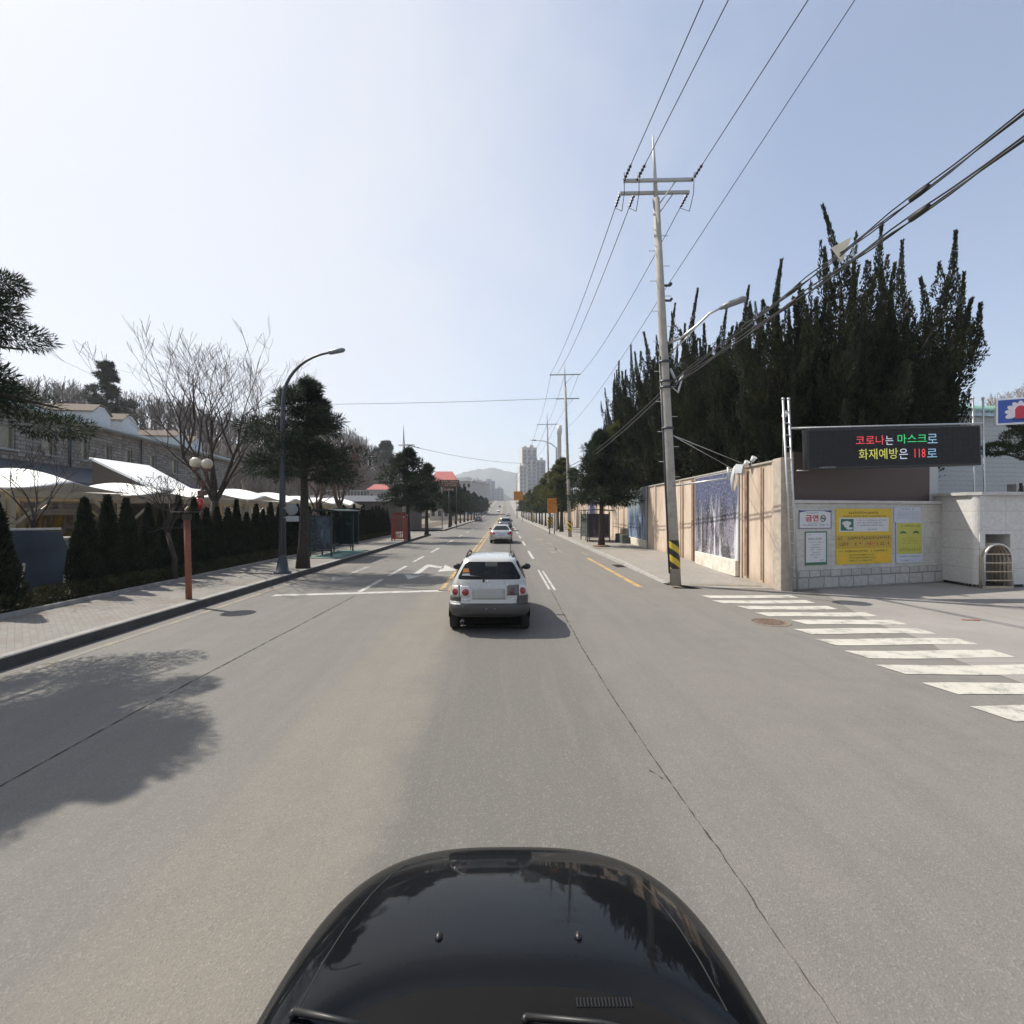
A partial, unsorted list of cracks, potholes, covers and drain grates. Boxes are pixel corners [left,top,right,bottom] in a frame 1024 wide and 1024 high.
manhole cover [748,618,792,627]
